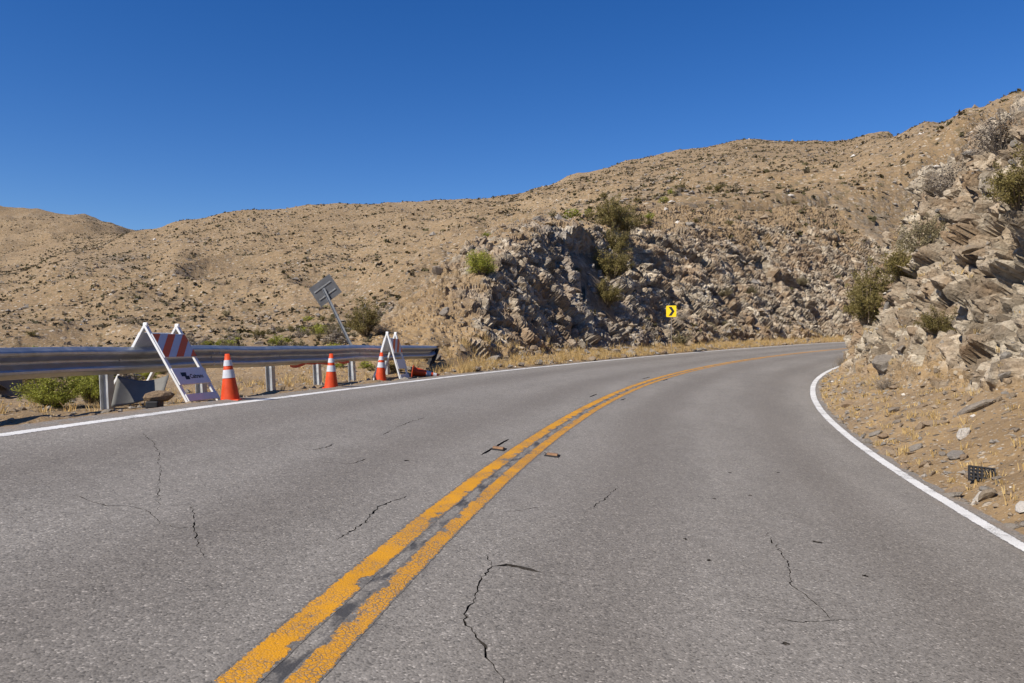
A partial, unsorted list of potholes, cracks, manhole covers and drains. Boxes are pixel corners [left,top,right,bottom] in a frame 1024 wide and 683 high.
crack [338,496,406,539]
crack [767,532,861,623]
crack [463,556,578,683]
crack [79,435,256,555]
